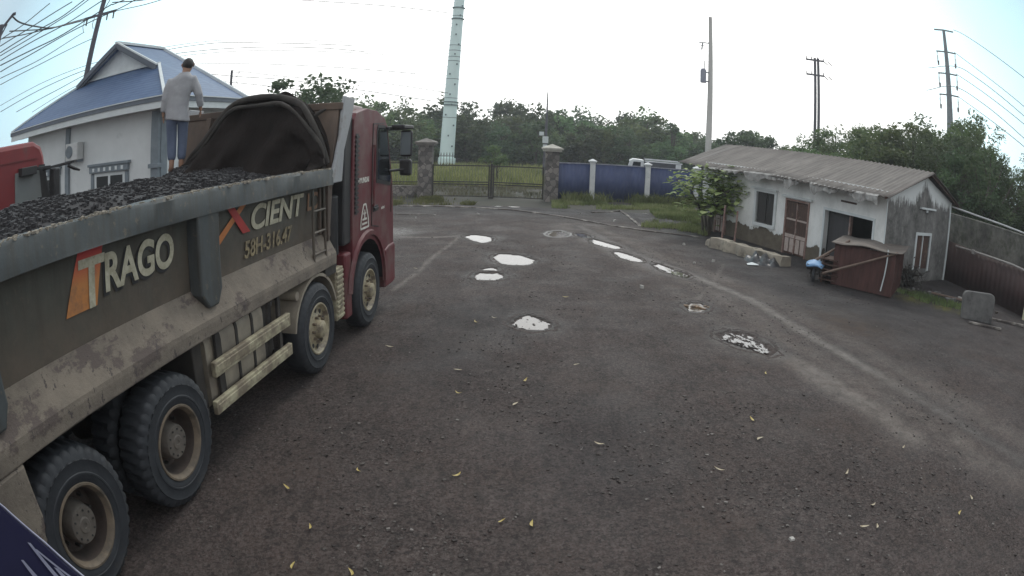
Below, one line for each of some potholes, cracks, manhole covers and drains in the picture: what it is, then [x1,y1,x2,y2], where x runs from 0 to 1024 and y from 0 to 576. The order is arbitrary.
pothole [501,312,561,333]
pothole [460,233,498,244]
pothole [585,238,626,250]
pothole [610,250,647,263]
pothole [709,328,784,358]
pothole [649,262,697,280]
pothole [487,252,541,266]
pothole [467,270,512,282]
pothole [676,300,715,314]
